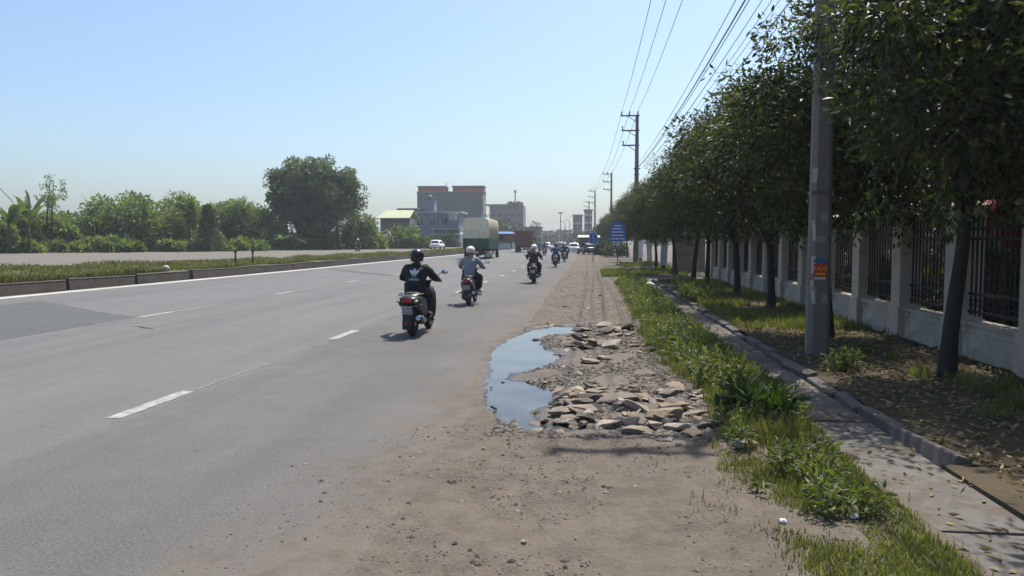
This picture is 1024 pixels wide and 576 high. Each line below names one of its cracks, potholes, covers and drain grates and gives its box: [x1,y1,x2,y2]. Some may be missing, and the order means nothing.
pothole [473,322,721,440]
